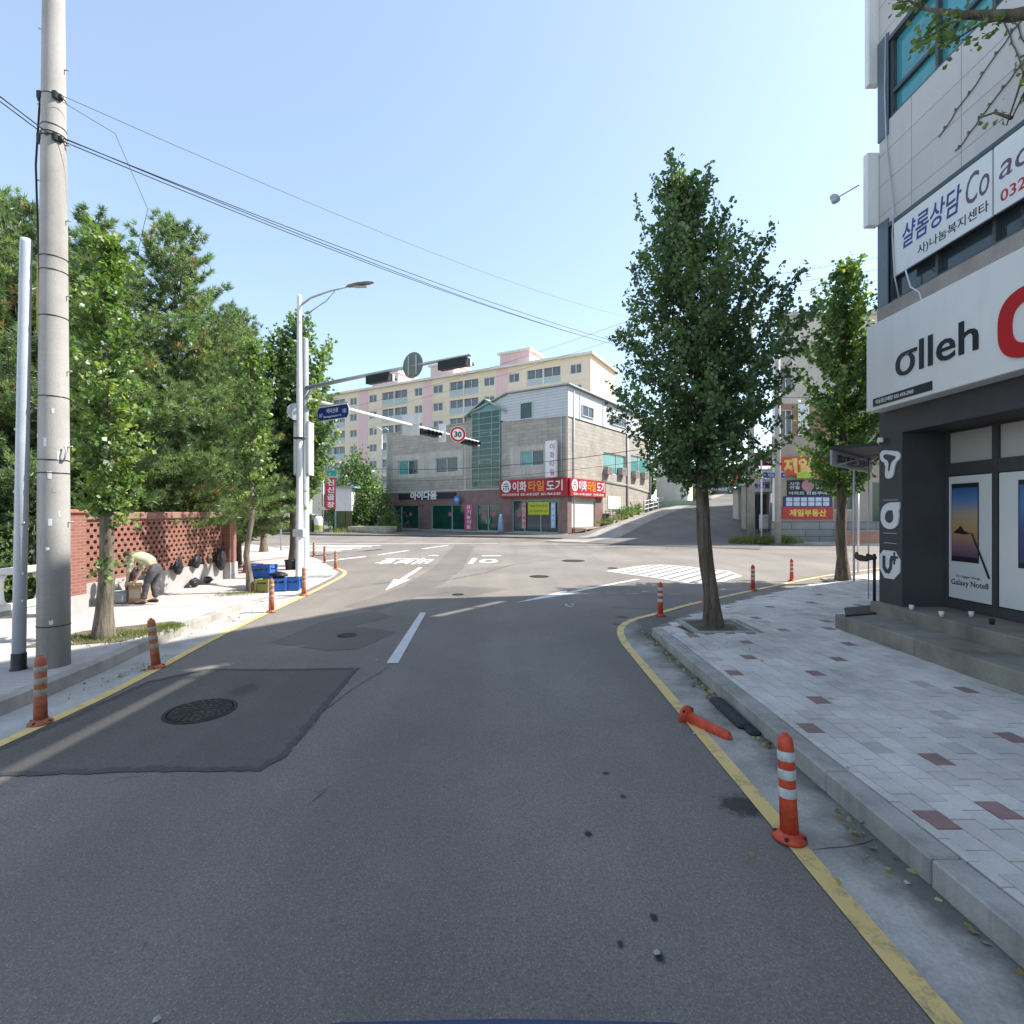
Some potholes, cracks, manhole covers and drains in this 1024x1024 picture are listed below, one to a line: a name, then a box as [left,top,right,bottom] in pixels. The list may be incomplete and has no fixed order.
manhole cover [161,698,238,725]
